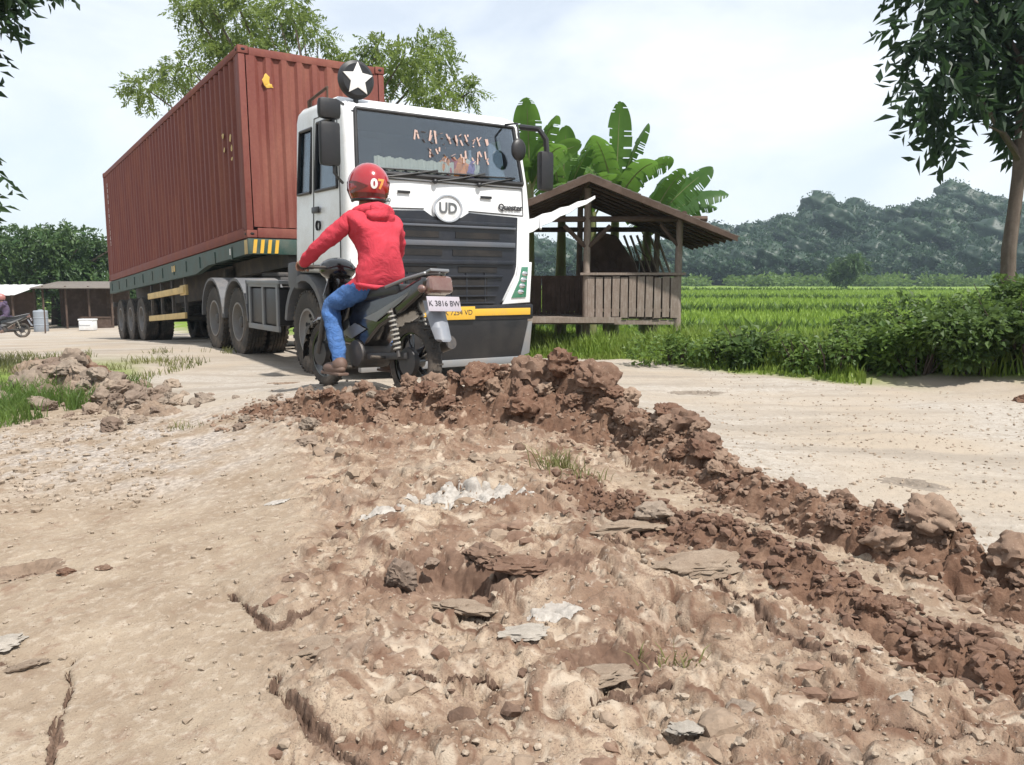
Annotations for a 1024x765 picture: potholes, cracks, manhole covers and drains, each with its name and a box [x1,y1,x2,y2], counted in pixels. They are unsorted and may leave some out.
crack [269,673,370,765]
pothole [359,541,548,625]
crack [227,593,331,632]
pothole [518,548,608,583]
crack [45,661,76,765]
